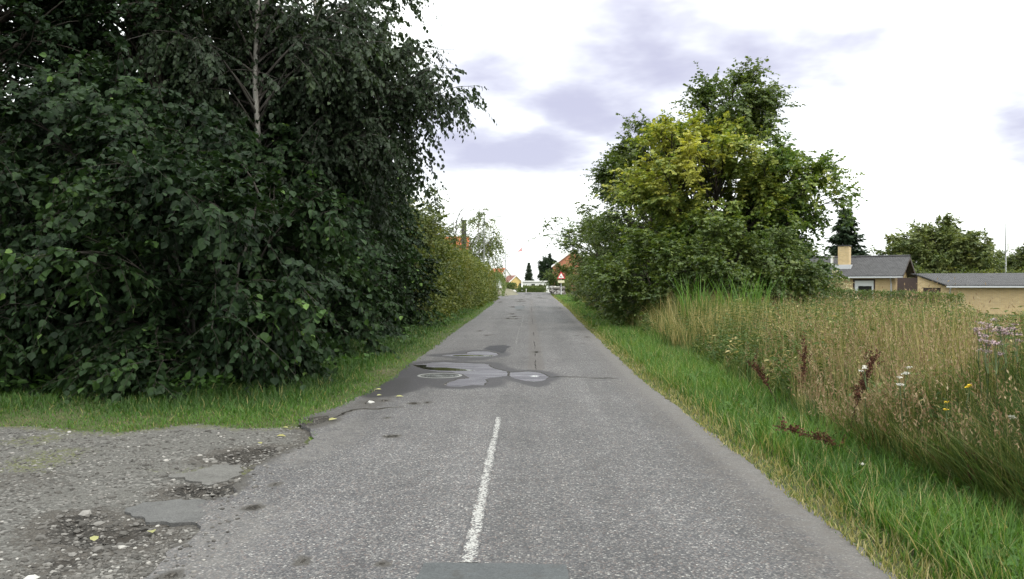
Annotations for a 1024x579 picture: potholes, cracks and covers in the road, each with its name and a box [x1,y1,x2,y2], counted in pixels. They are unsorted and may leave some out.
pothole [162,483,234,500]
pothole [45,515,157,550]
pothole [207,446,278,465]
